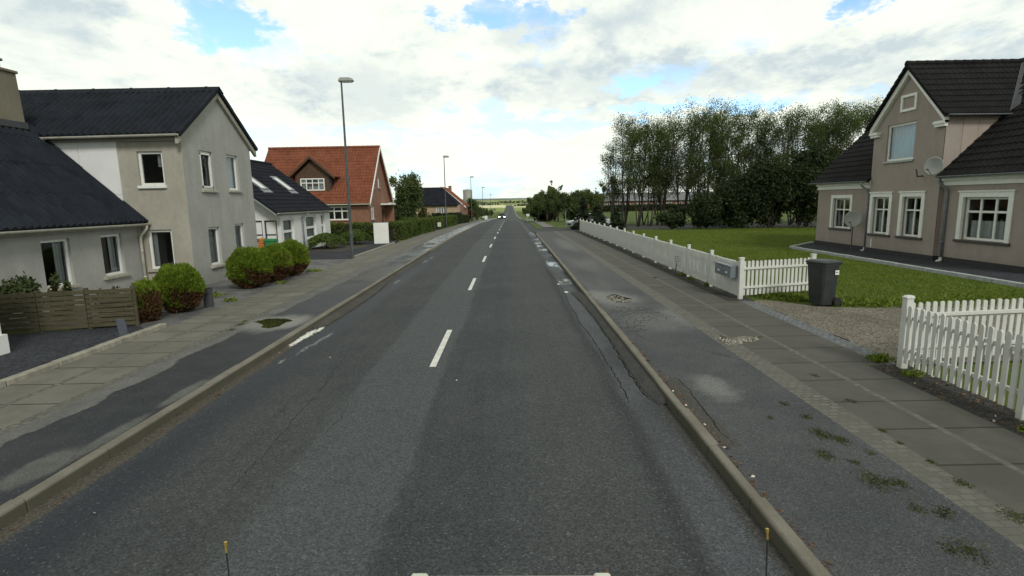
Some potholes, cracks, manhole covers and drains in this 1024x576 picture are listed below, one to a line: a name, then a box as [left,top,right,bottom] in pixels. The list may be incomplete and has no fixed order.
pothole [254,318,293,328]
crack [544,267,675,406]
crack [675,378,732,446]
